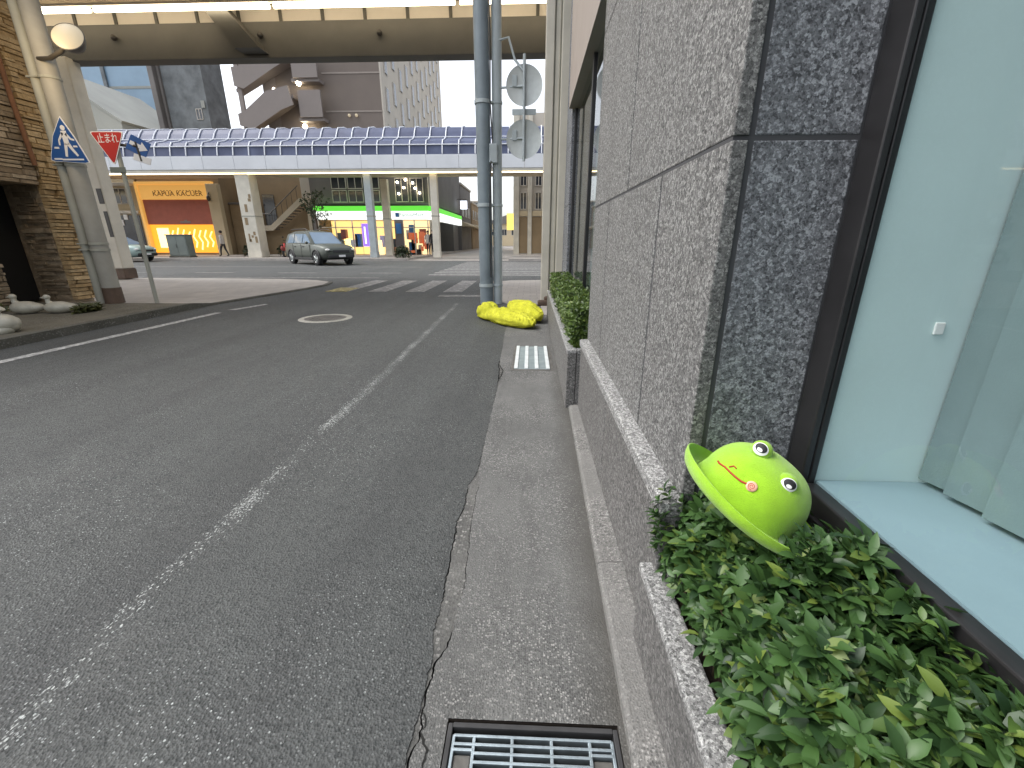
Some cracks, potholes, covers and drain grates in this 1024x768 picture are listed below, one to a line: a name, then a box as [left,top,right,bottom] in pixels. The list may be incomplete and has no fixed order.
drain grate [440,719,625,768]
crack [406,627,455,768]
crack [440,482,480,607]
